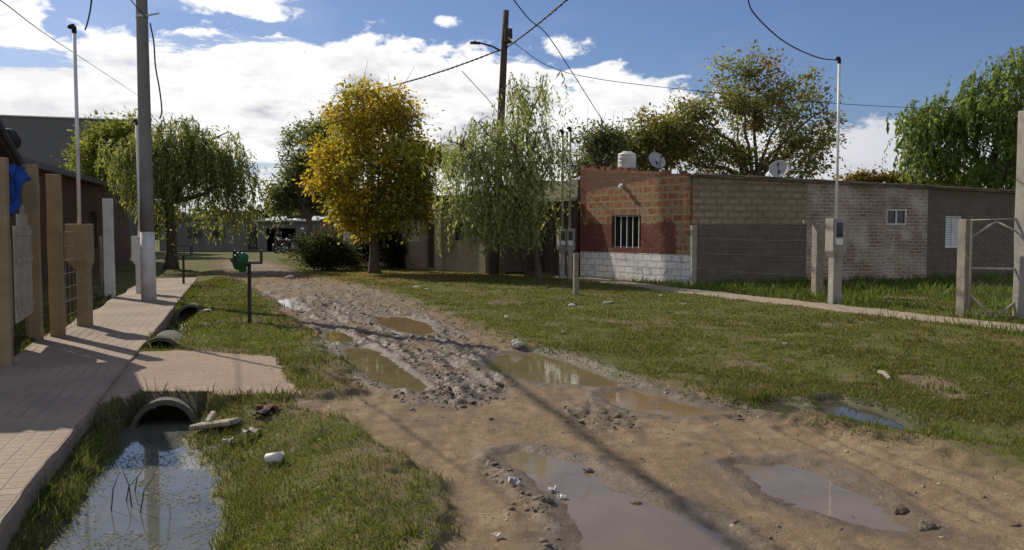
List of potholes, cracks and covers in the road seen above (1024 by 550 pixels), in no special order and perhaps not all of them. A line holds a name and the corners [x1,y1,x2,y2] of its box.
pothole [586,382,757,421]
pothole [714,454,944,535]
pothole [312,328,366,345]
pothole [802,392,943,432]
pothole [477,442,776,550]
pothole [465,345,644,388]
pothole [365,313,447,338]
pothole [331,342,442,393]
